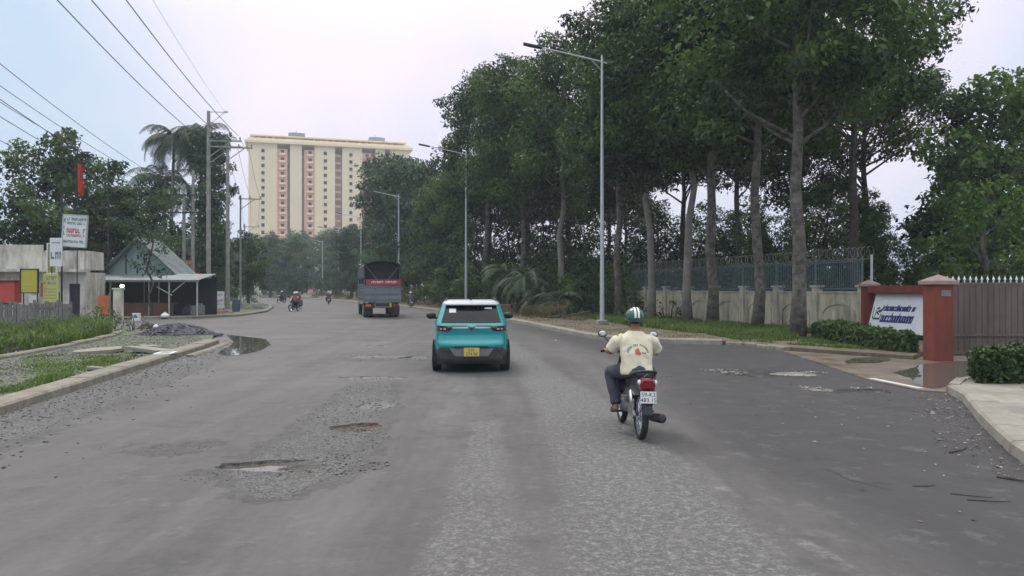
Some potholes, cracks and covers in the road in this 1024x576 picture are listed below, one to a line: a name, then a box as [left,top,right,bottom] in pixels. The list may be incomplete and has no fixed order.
pothole [328,423,382,432]
pothole [214,460,324,472]
